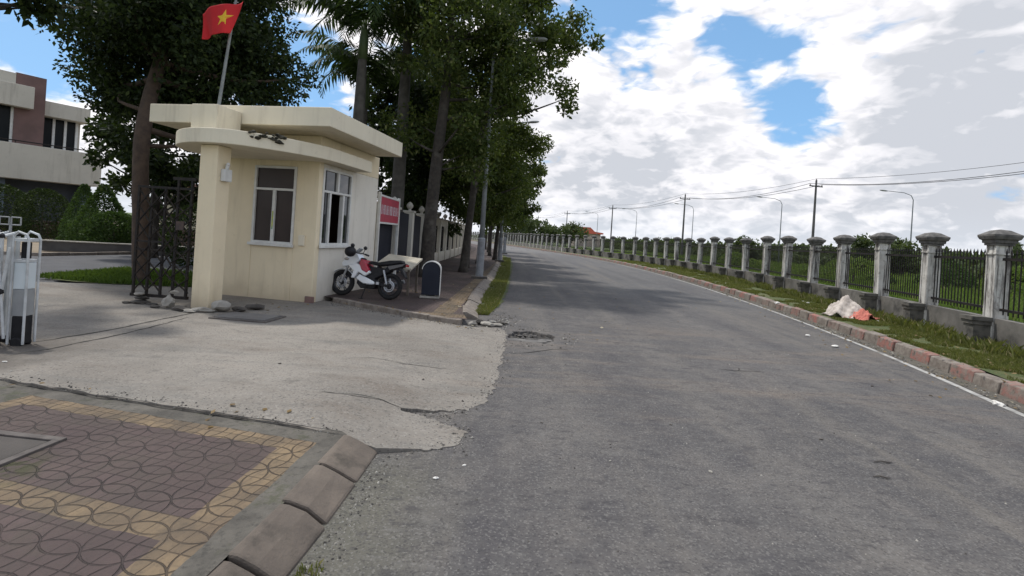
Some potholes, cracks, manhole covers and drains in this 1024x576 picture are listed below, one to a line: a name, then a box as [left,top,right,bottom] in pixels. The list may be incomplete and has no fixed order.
manhole cover [208,312,286,323]
manhole cover [0,430,67,467]
pothole [507,329,563,346]
